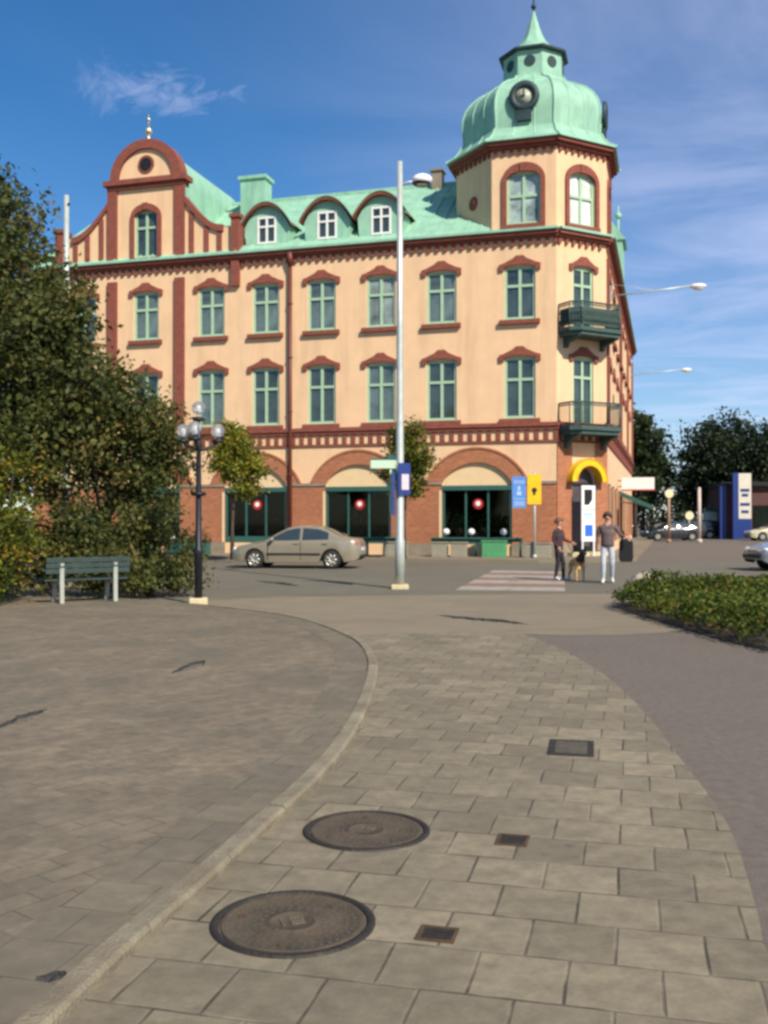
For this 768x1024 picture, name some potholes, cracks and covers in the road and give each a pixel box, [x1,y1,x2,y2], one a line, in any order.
manhole cover [303,810,430,852]
crack [0,709,47,728]
crack [172,660,205,673]
pothole [35,970,67,982]
manhole cover [209,890,376,959]
